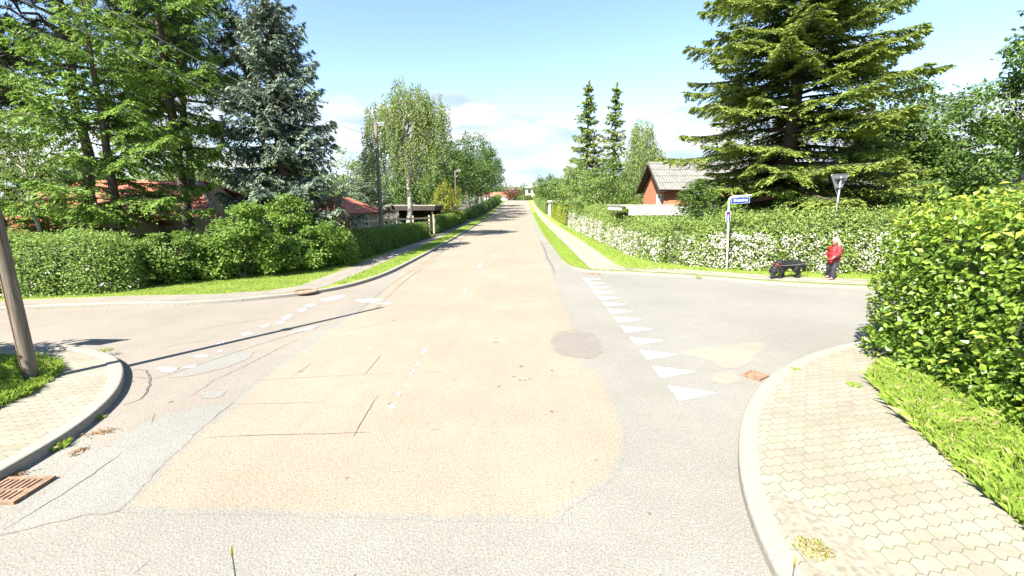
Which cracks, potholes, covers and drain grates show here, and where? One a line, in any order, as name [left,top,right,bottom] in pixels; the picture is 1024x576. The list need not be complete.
drain grate [741,370,769,382]
crack [128,369,155,424]
drain grate [0,475,57,505]
crack [3,455,119,530]
